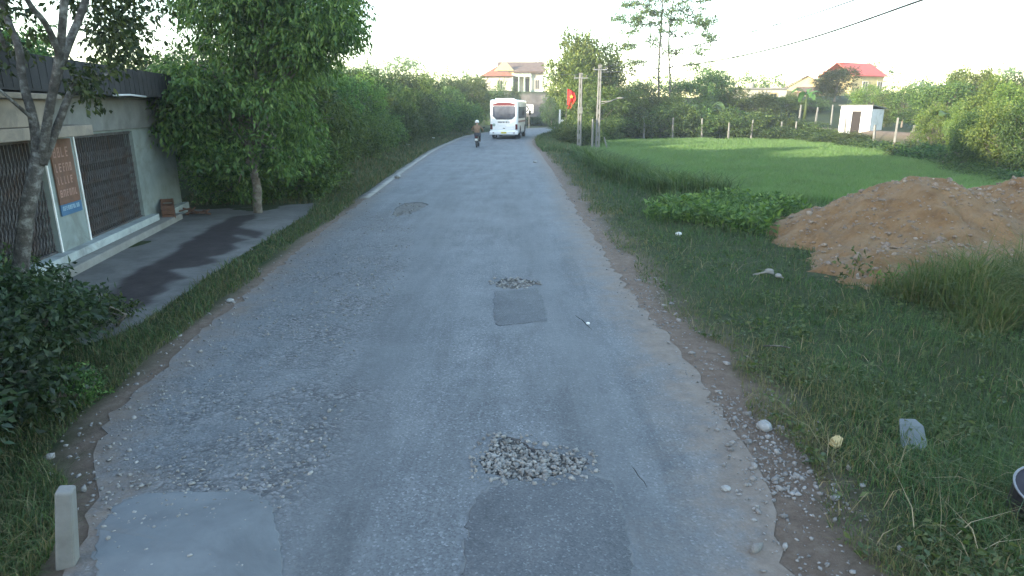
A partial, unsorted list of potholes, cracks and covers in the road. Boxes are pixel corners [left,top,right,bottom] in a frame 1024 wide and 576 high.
pothole [392,202,428,217]
pothole [469,431,600,485]
pothole [488,276,542,289]
